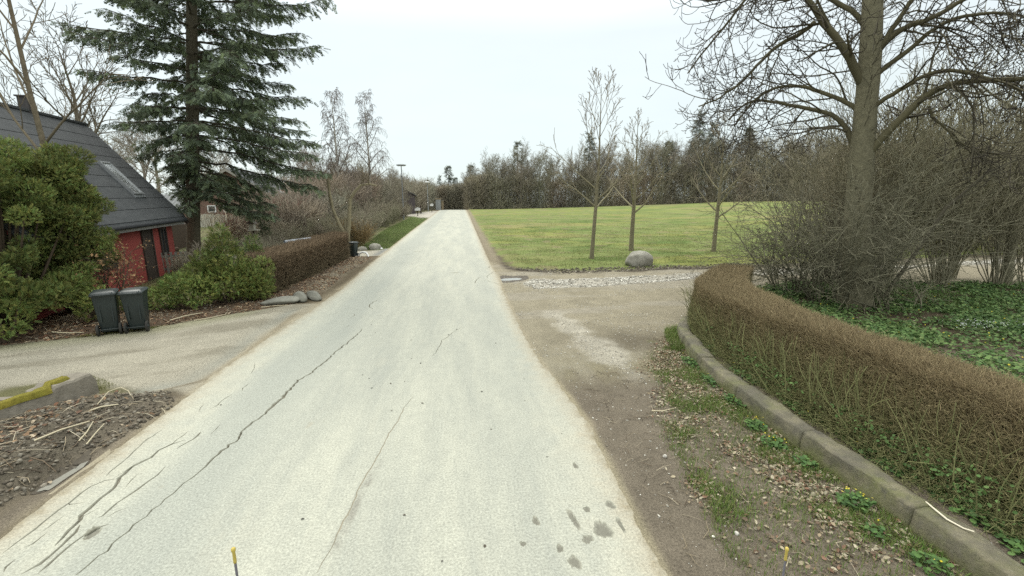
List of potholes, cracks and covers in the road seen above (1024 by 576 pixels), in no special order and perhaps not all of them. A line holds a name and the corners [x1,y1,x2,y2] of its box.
crack [3,300,440,575]
